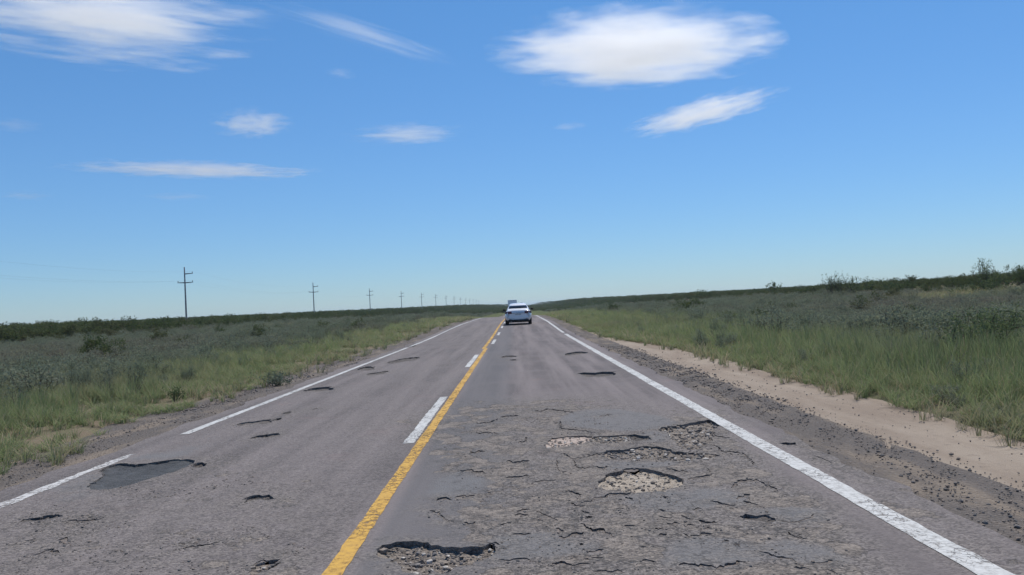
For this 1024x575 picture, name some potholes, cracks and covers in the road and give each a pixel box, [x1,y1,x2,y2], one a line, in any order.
pothole [242,495,274,503]
pothole [546,436,592,448]
crack [491,453,640,573]
crack [460,415,518,474]
pothole [603,446,719,461]
